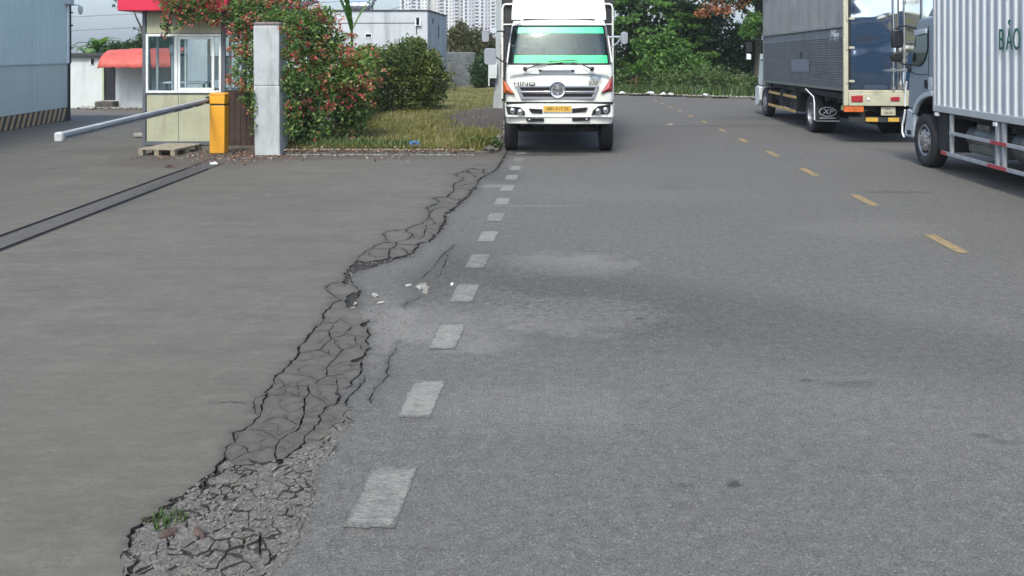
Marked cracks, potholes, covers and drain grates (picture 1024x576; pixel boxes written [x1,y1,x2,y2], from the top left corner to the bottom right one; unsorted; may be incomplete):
crack [120,279,396,576]
crack [357,151,508,306]
pothole [345,290,362,308]
